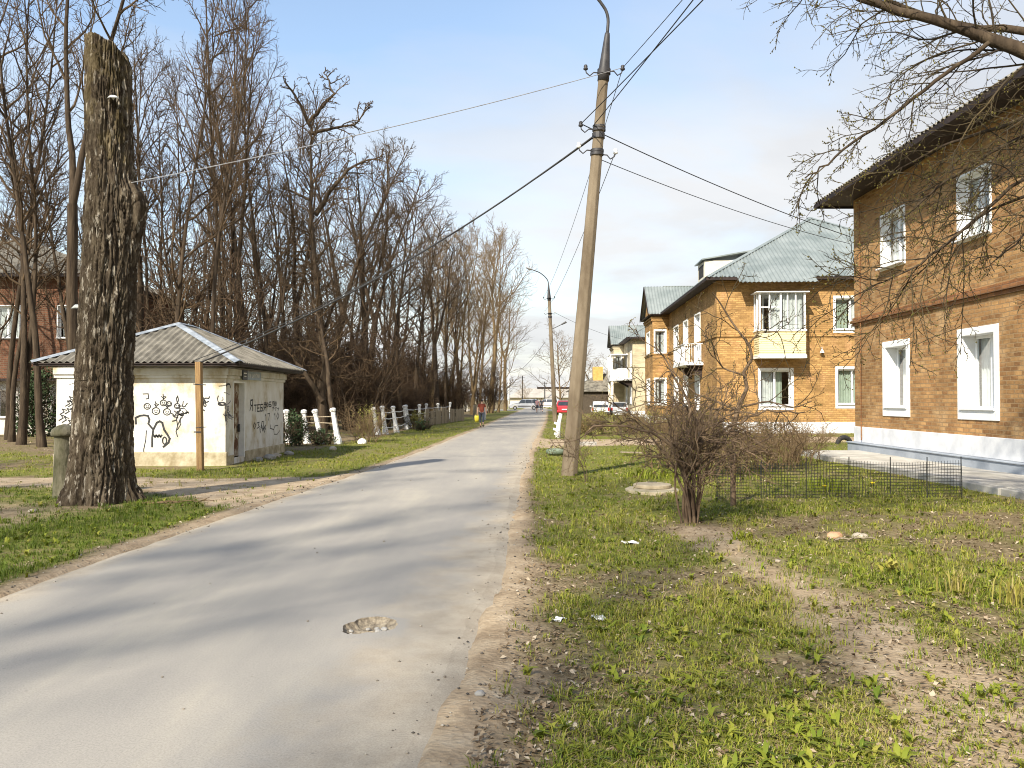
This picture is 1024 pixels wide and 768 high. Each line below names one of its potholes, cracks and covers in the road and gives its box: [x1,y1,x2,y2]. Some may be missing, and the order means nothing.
pothole [342,616,398,634]
manhole cover [625,482,679,496]
